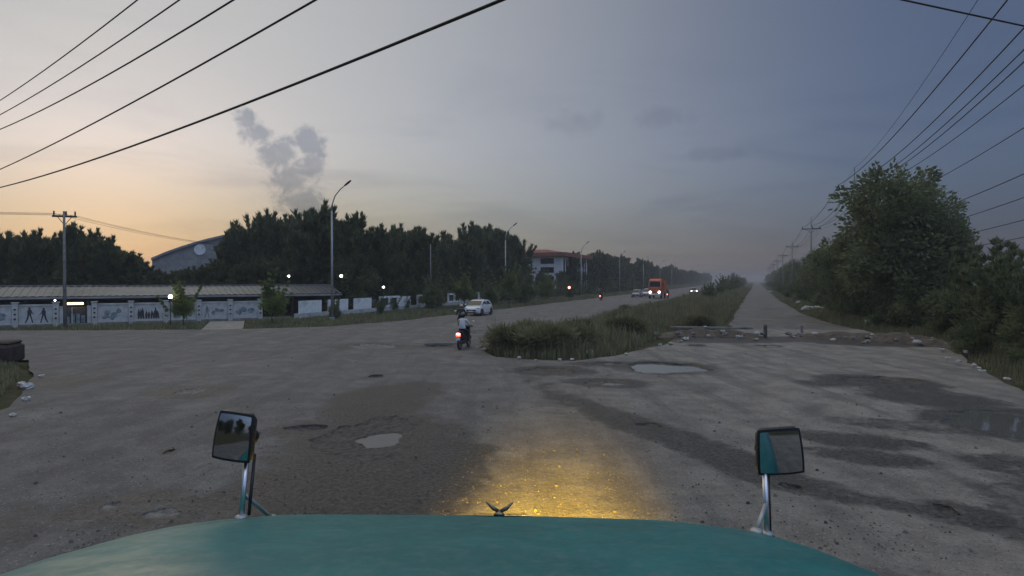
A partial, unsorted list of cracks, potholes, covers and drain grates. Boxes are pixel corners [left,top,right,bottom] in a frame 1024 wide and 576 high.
pothole [307,415,419,462]
pothole [628,361,713,374]
pothole [932,503,960,515]
pothole [940,409,1024,439]
pothole [778,482,804,492]
pothole [139,507,182,519]
pothole [98,501,122,511]
